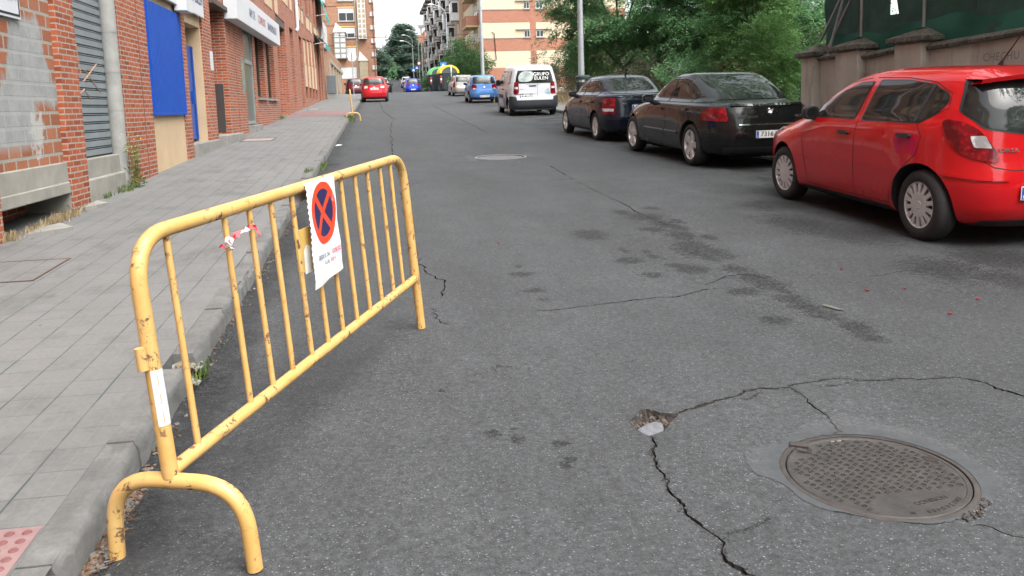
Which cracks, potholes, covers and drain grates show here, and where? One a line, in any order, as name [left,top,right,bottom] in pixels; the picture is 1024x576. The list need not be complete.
crack [651,437,773,576]
pothole [629,409,678,436]
manhole cover [465,153,536,161]
crack [678,377,1023,418]
crack [542,274,763,311]
manhole cover [744,414,1003,524]
crack [371,104,446,324]
